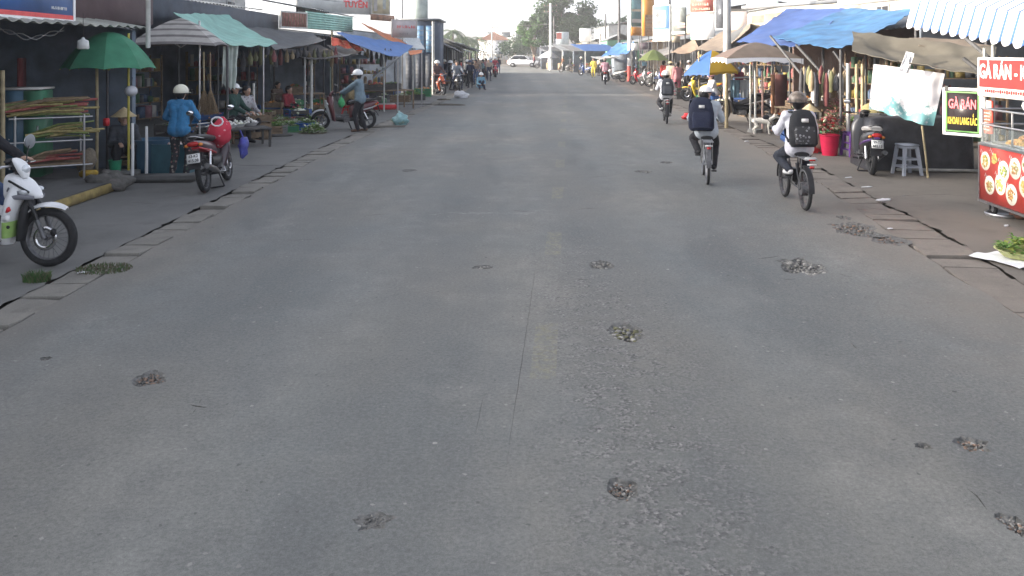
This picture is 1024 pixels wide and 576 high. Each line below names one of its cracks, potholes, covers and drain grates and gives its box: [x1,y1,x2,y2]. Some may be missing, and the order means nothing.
pothole [606,322,645,343]
pothole [589,260,614,269]
pothole [993,512,1024,537]
pothole [131,370,166,388]
crack [505,259,537,474]
pothole [352,511,397,531]
pothole [952,436,992,452]
pothole [607,477,638,502]
pothole [776,257,828,276]
